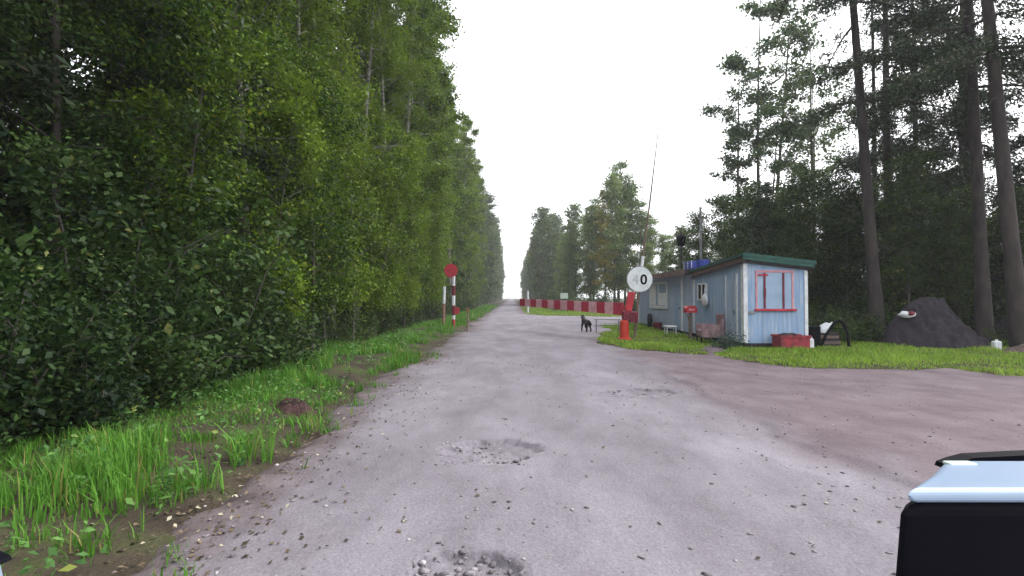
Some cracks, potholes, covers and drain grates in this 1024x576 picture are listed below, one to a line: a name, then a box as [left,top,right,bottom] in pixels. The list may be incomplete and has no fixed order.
pothole [595,388,688,398]
pothole [405,547,527,576]
pothole [431,438,550,467]
